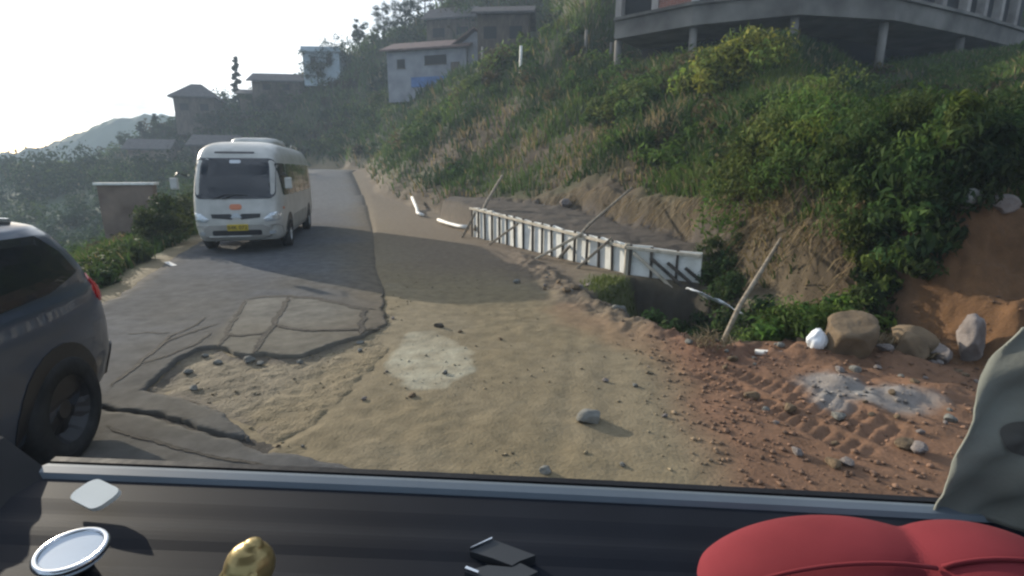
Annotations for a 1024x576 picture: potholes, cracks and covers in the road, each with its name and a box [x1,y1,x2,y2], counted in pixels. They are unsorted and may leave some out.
crack [102,408,276,465]
pothole [148,340,389,443]
crack [110,295,384,387]
